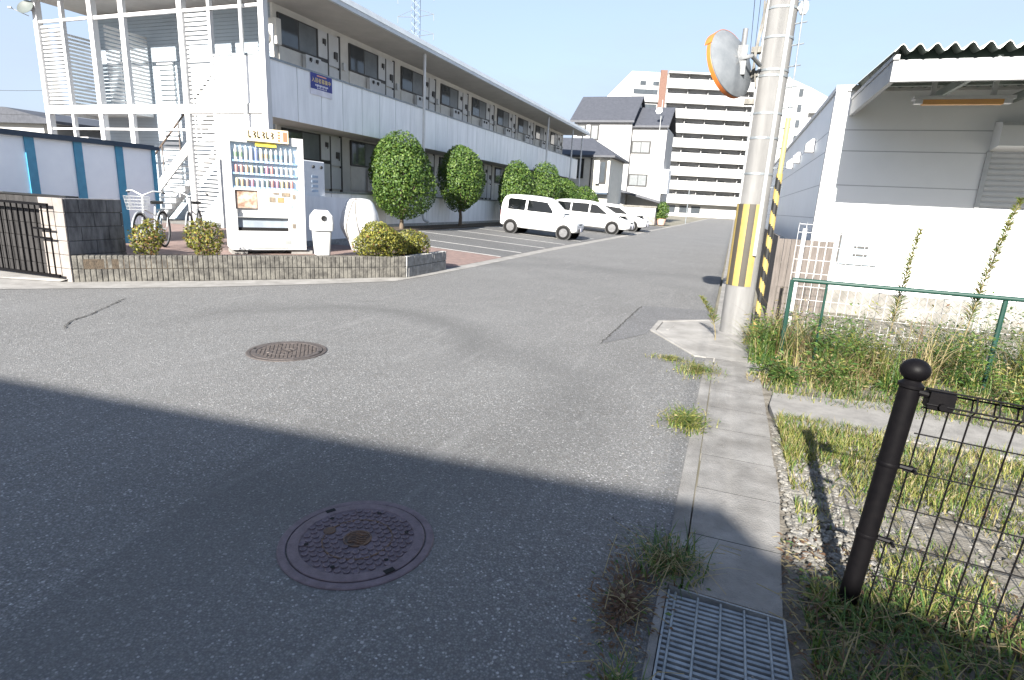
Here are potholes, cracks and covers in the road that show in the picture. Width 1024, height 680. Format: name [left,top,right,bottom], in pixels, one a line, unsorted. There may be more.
manhole cover [276,500,434,591]
manhole cover [246,341,327,362]
drain grate [652,585,793,680]
